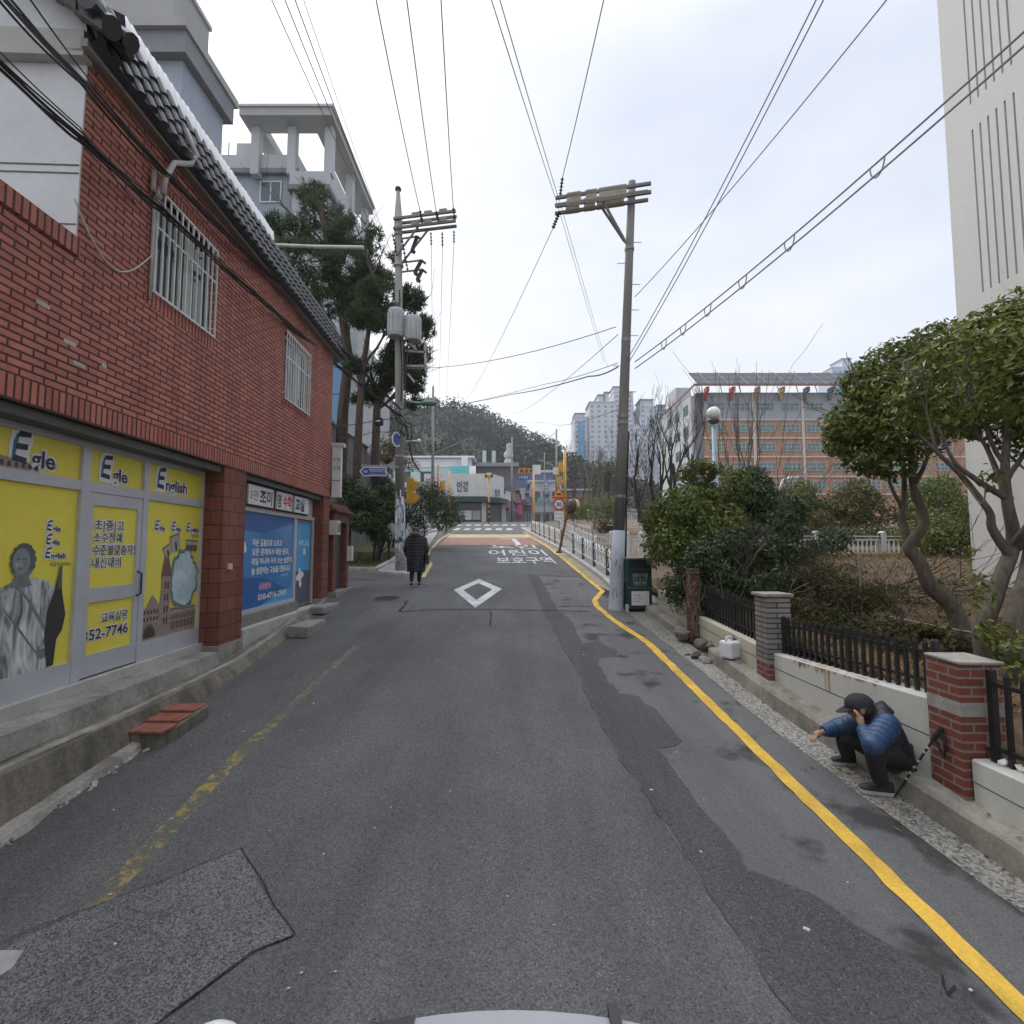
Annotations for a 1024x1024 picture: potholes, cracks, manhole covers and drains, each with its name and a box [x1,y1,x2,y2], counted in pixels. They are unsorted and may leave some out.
crack [399,600,556,626]
